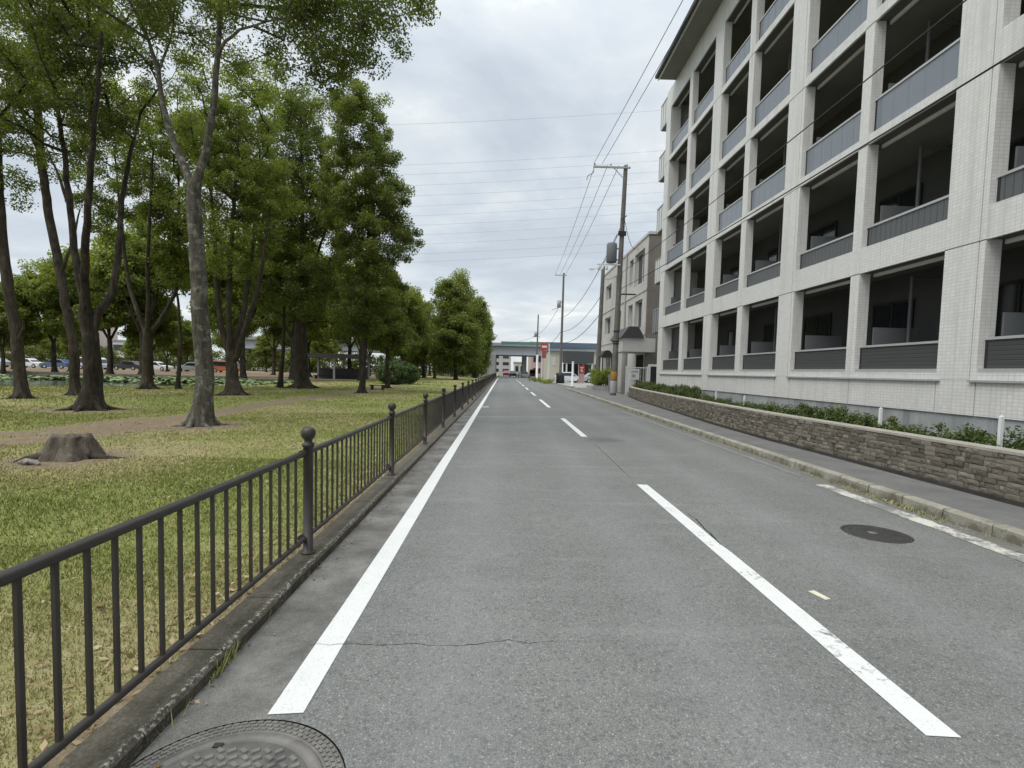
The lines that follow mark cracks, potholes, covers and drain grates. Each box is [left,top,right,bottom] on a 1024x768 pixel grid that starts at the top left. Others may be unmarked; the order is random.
manhole cover [841,525,914,544]
manhole cover [130,720,345,768]
crack [280,639,583,649]
